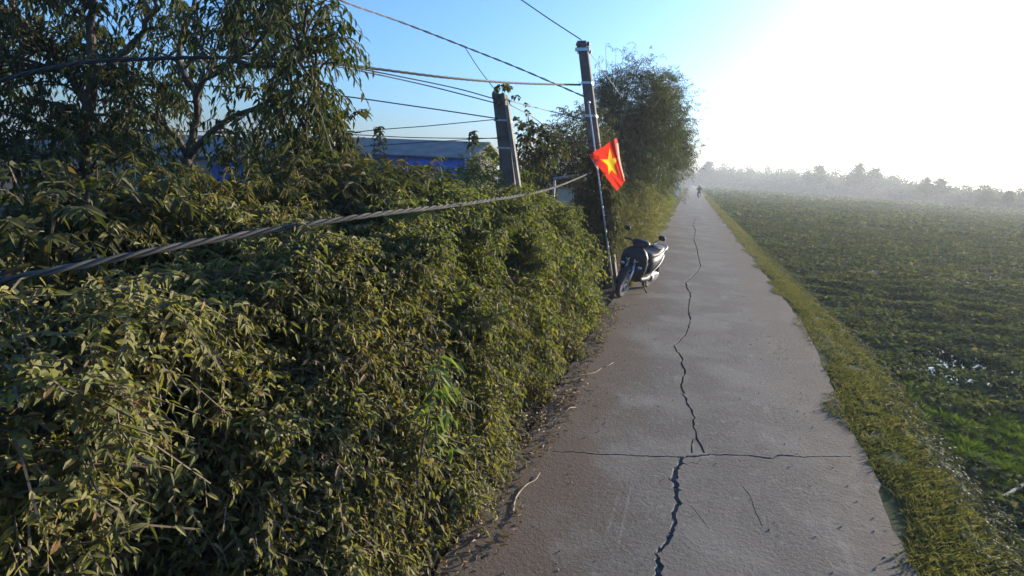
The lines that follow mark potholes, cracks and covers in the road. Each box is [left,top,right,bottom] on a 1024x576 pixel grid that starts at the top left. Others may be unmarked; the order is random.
crack [653,219,710,576]
